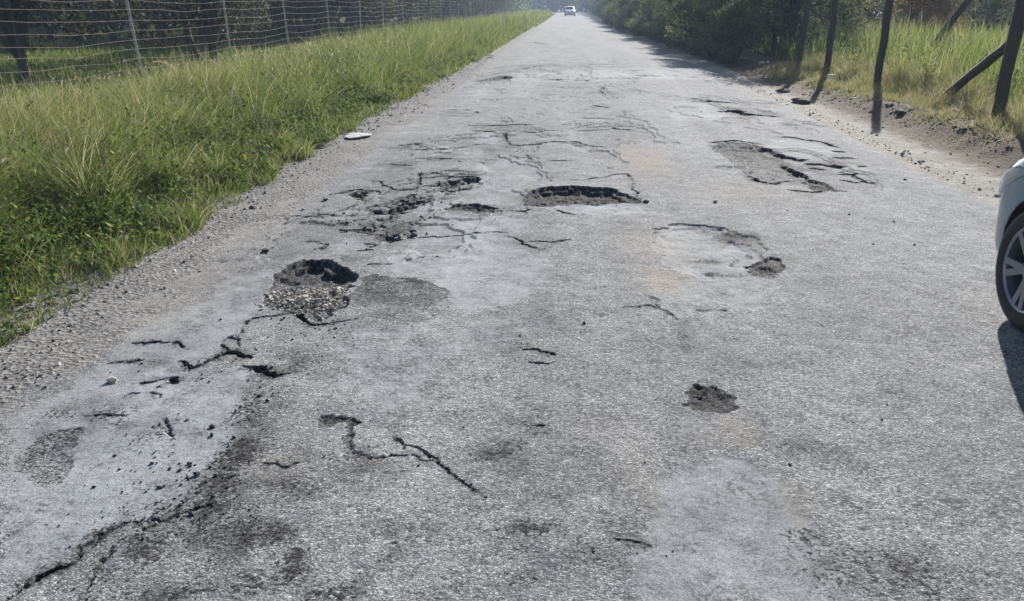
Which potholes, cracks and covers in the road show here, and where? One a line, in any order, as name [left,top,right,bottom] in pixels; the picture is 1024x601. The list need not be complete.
crack [83,310,359,417]
pothole [742,256,787,279]
crack [370,435,488,499]
crack [289,64,653,267]
pothole [681,383,742,414]
crack [619,294,729,321]
pothole [262,259,360,323]
pothole [711,142,804,185]
crack [4,503,213,601]
pothole [444,203,499,215]
pothole [522,185,643,207]
